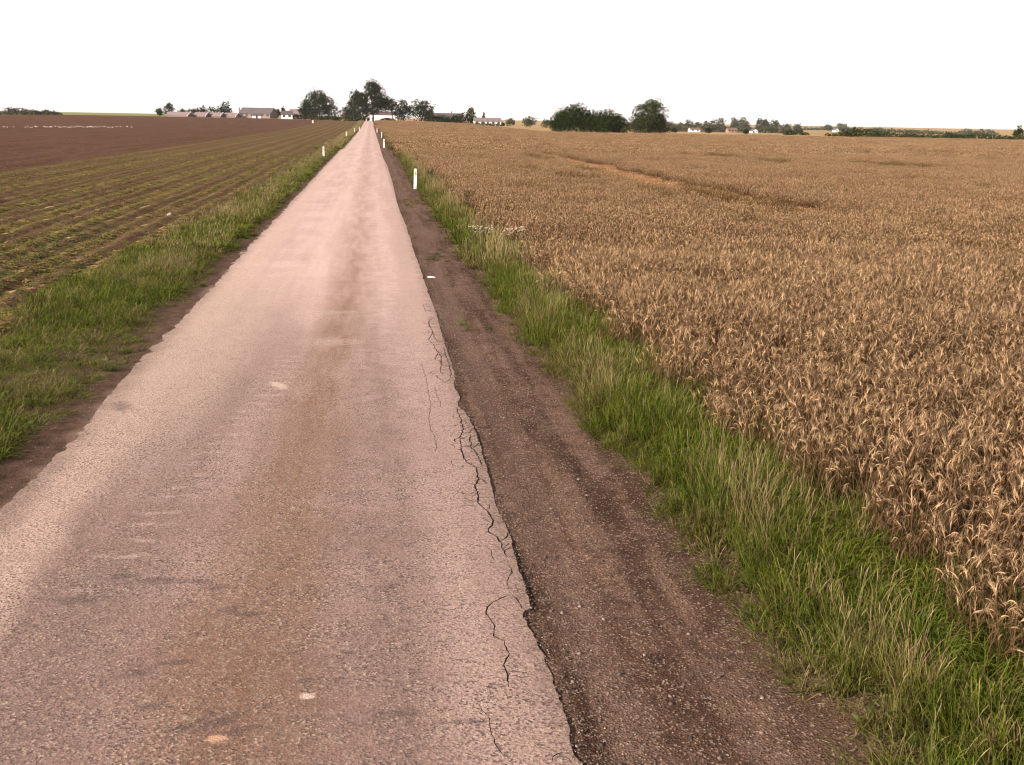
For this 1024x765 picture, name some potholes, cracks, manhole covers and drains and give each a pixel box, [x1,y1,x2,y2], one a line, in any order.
crack [420,304,530,687]
